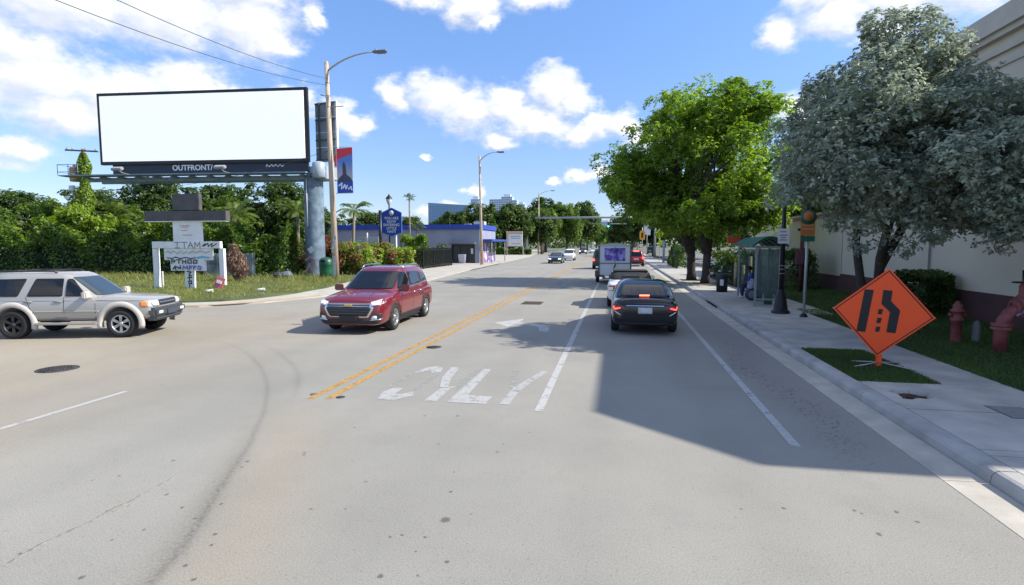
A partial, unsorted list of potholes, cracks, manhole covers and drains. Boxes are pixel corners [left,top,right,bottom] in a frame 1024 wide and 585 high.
manhole cover [34,365,80,373]
crack [0,477,173,569]
